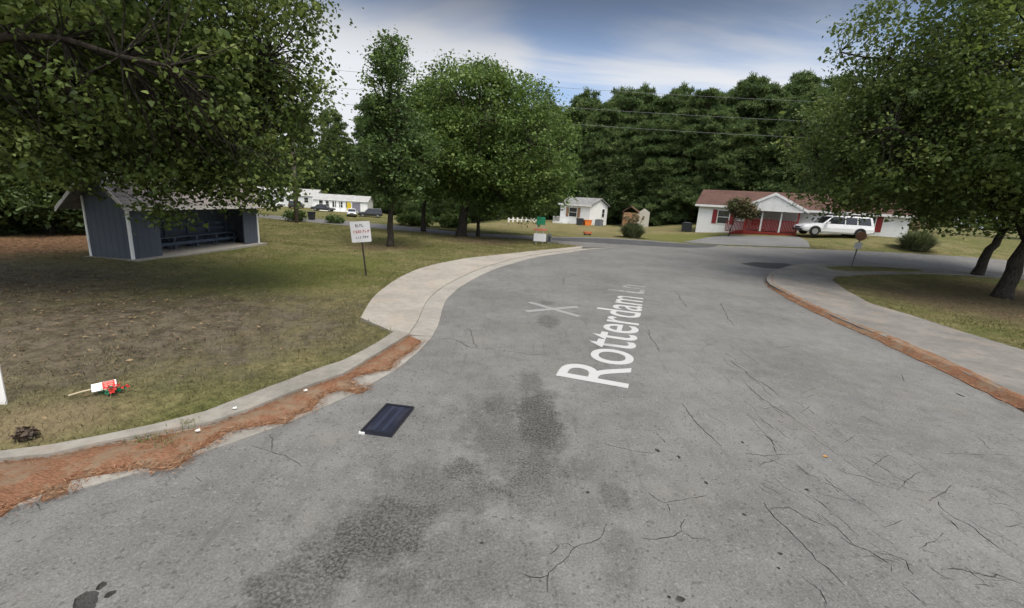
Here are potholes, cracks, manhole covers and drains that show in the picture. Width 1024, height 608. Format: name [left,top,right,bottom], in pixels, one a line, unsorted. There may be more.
crack [639,492,707,540]
crack [251,434,302,467]
crack [683,345,1024,604]
crack [525,525,606,592]
